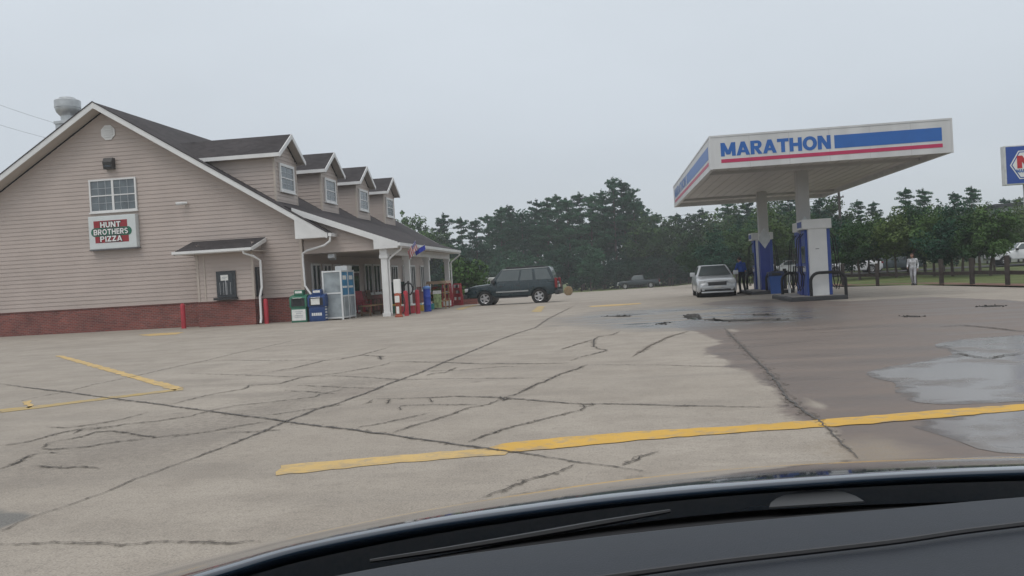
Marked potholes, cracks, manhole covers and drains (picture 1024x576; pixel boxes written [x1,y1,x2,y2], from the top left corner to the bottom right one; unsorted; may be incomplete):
crack [0,333,615,468]
crack [635,331,688,355]
crack [486,463,575,496]
